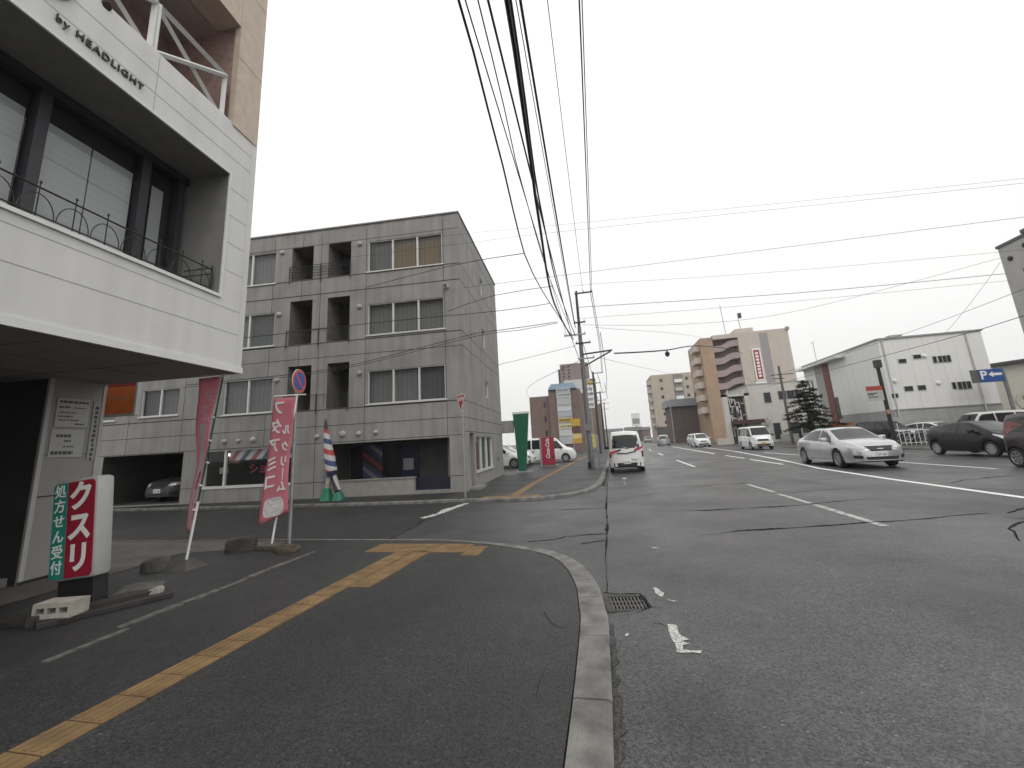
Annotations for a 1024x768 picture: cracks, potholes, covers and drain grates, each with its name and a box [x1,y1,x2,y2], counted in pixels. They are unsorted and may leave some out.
crack [523,483,870,626]
drain grate [602,594,649,613]
crack [1007,508,1024,541]
